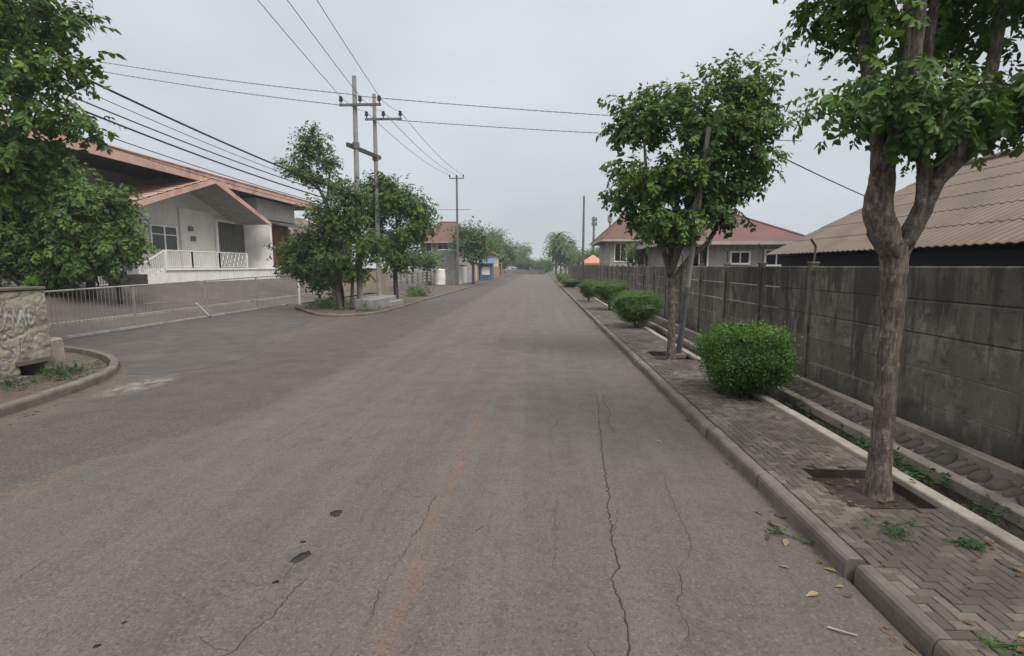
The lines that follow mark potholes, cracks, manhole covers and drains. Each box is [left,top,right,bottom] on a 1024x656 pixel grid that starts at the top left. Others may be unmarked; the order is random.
crack [663,475,692,647]
pothole [289,551,312,564]
crack [371,496,437,619]
crack [587,394,631,656]
crack [192,564,306,656]
